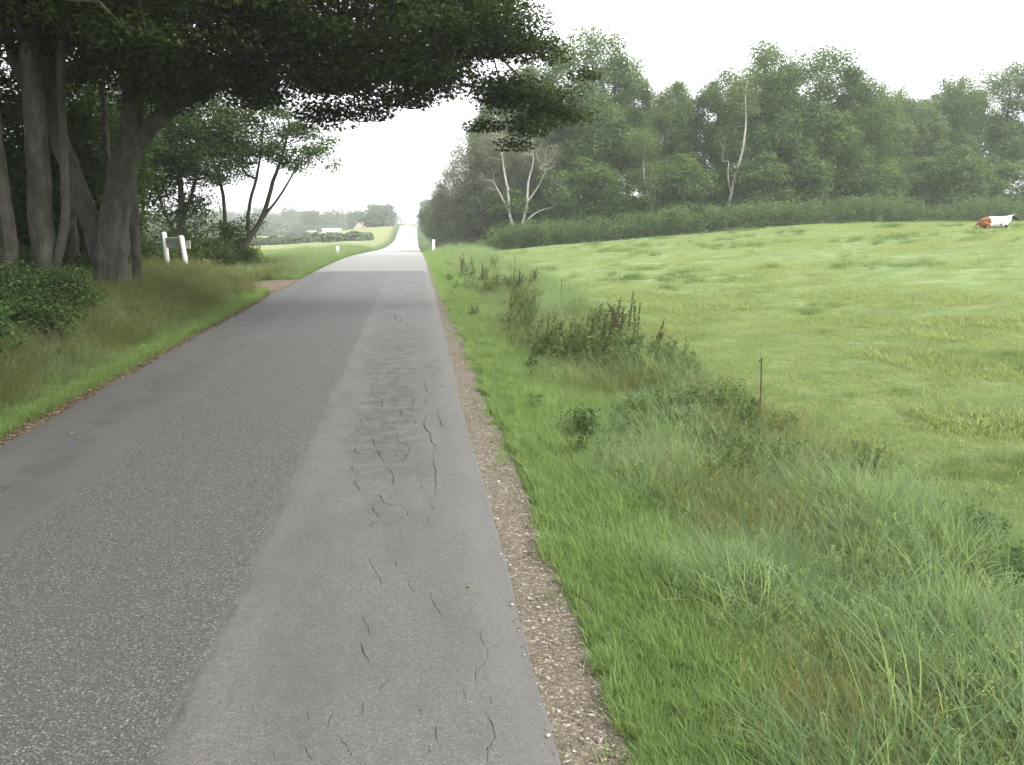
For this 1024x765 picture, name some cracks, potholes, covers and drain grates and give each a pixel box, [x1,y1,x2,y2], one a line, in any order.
crack [485,697,496,761]
crack [351,366,450,527]
